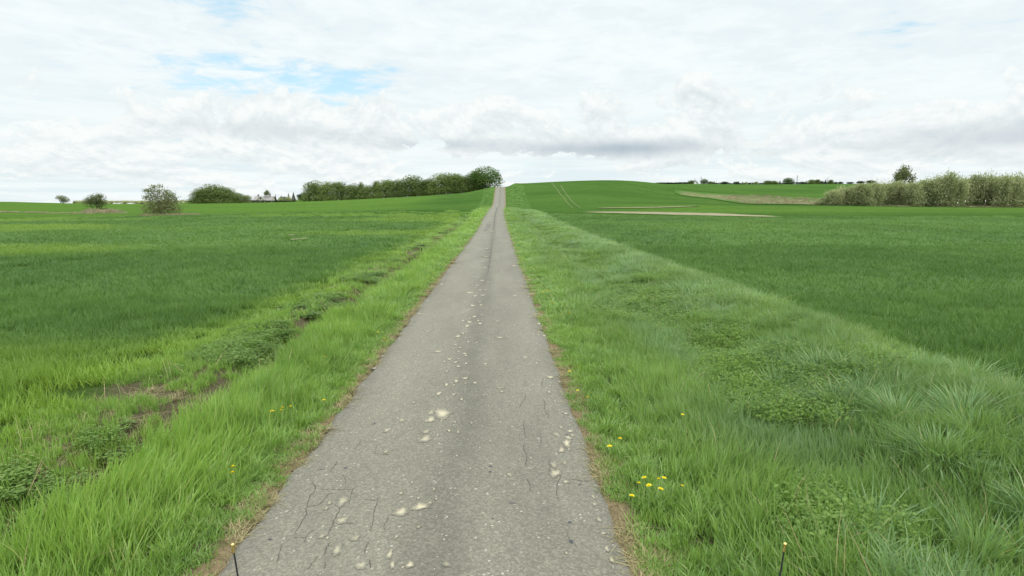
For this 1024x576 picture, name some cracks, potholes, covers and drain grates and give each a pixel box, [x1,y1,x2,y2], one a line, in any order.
crack [277,464,389,568]
crack [519,379,581,501]
